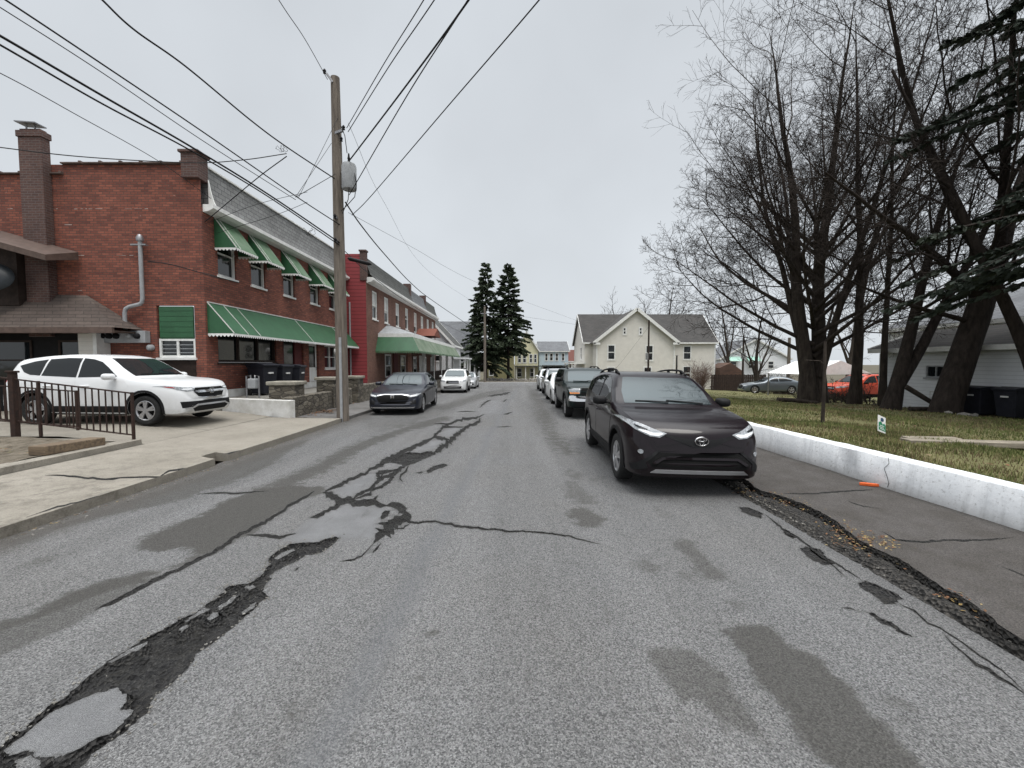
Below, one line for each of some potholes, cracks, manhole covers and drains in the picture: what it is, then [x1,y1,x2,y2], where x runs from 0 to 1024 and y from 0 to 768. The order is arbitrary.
crack [882,531,1012,543]
pothole [858,580,903,604]
crack [28,399,597,610]
pothole [739,507,763,518]
pothole [800,546,834,565]
crack [766,490,874,579]
